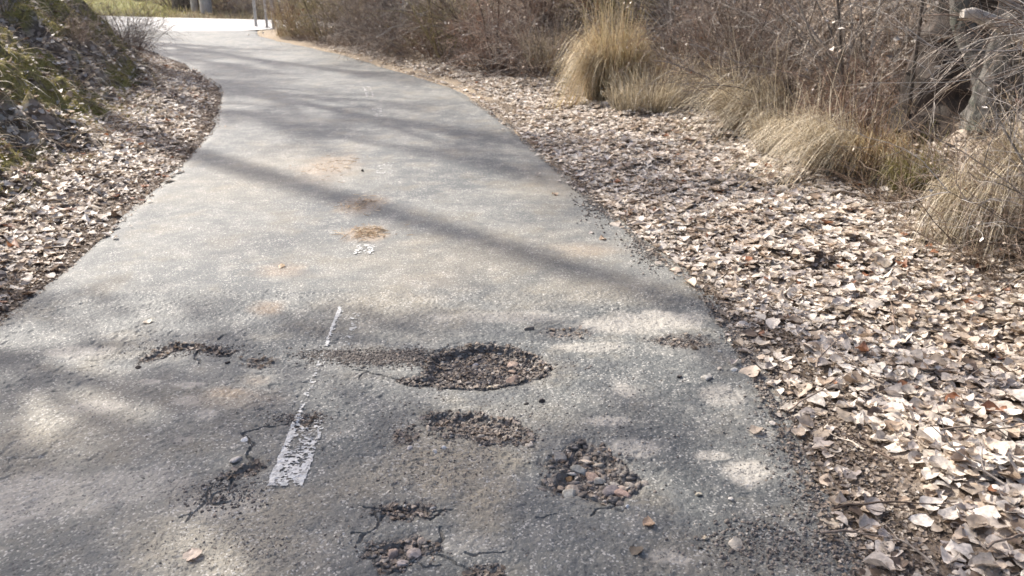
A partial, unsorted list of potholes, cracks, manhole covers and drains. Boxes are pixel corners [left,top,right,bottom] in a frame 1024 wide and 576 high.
pothole [391,424,420,446]
pothole [380,501,436,523]
pothole [422,409,539,447]
